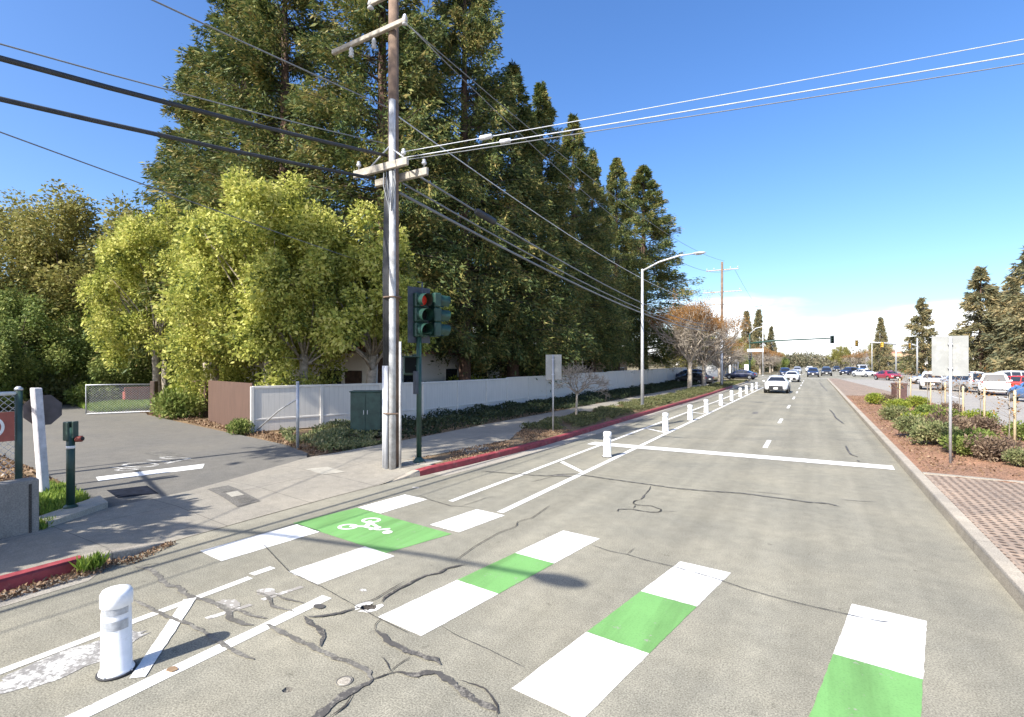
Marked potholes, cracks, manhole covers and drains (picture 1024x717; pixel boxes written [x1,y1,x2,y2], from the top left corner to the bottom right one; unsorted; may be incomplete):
crack [617,486,662,512]
utility cover [208,485,260,507]
crack [266,616,524,717]
manhole cover [336,676,353,687]
